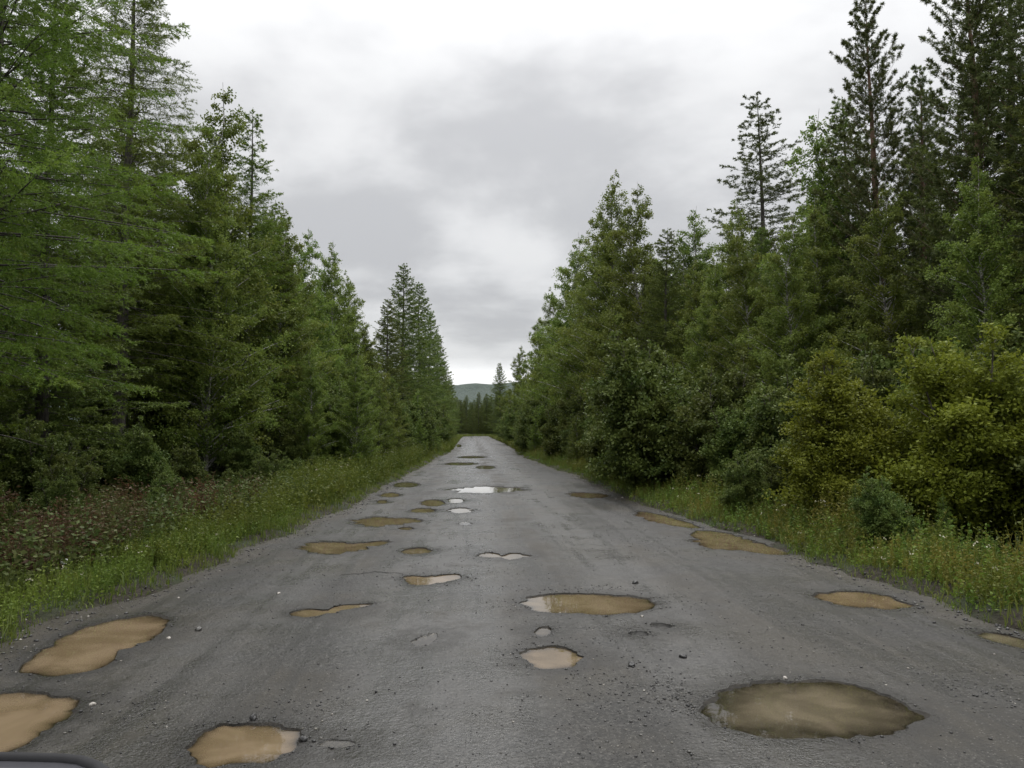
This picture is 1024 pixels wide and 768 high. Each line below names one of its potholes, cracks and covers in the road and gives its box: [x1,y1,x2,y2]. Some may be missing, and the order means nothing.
pothole [289,603,374,617]
pothole [689,530,789,555]
pothole [351,516,426,527]
pothole [973,631,1024,649]
pothole [295,540,394,555]
pothole [476,552,533,560]
pothole [699,679,931,739]
pothole [410,632,438,646]
pothole [519,645,584,669]
pothole [17,614,171,677]
pothole [519,593,657,615]
pothole [810,591,915,610]
